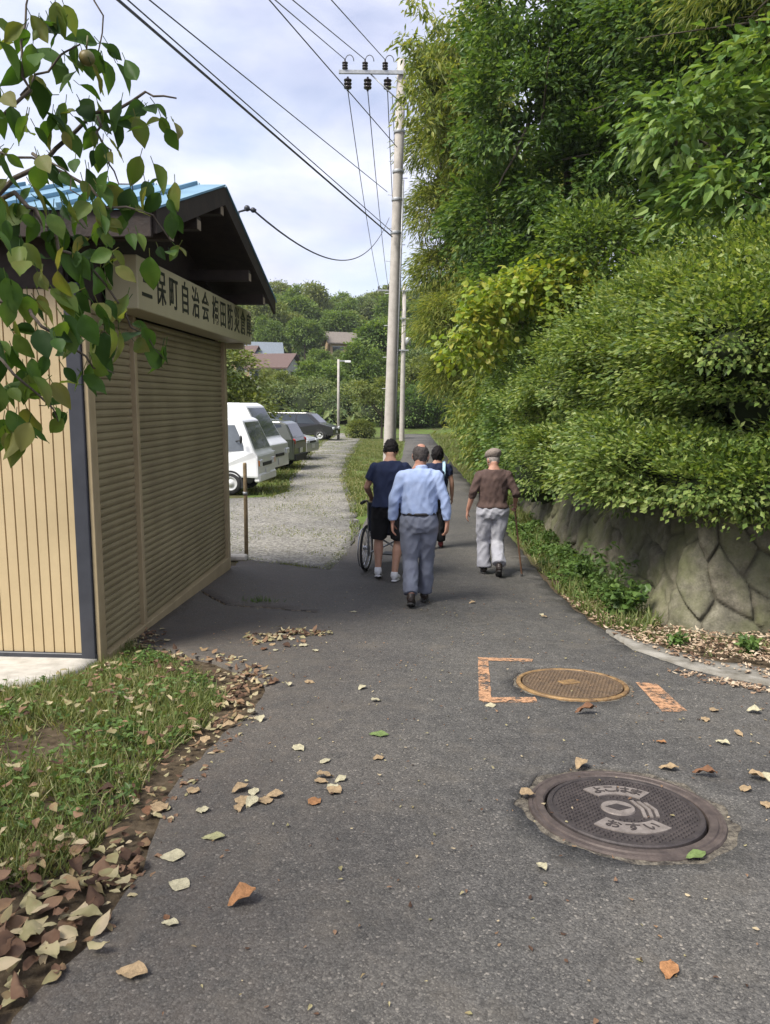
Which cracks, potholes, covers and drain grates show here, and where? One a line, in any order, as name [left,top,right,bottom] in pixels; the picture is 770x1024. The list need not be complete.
manhole cover [512,668,634,702]
crack [201,591,310,612]
manhole cover [513,767,741,865]
